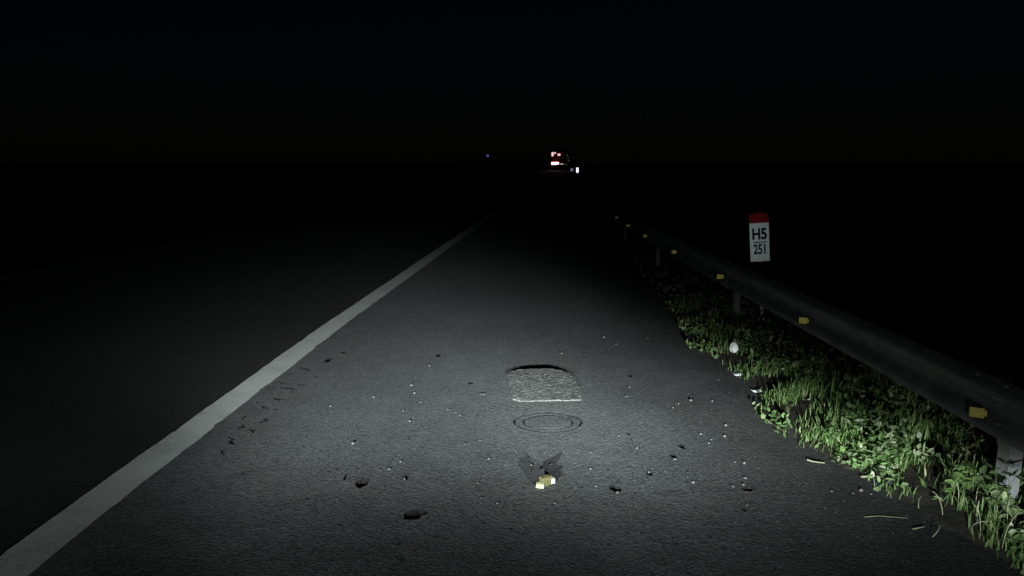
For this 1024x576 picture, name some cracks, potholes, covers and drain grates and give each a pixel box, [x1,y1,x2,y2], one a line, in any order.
pothole [404,509,428,520]
manhole cover [513,411,583,433]
